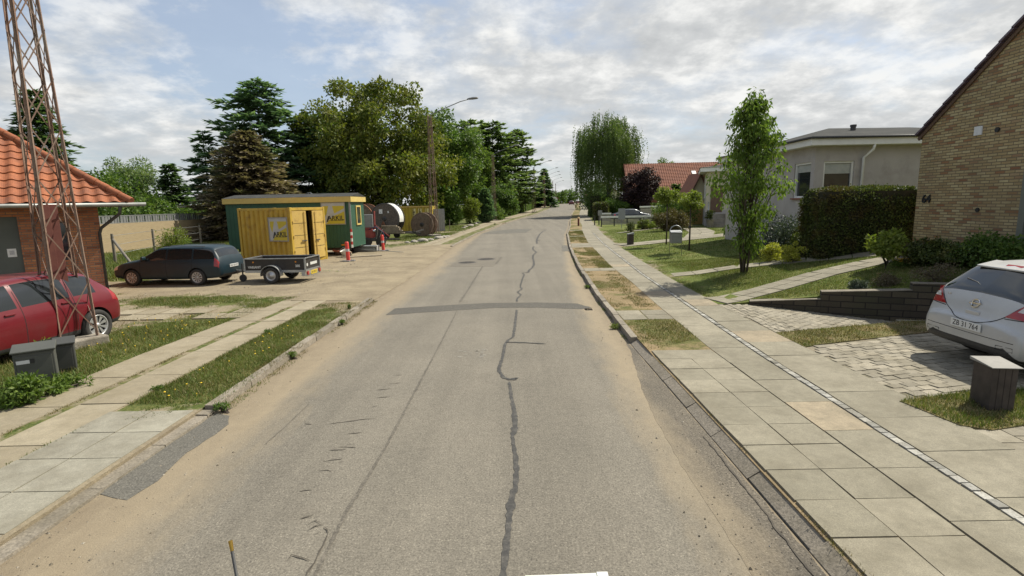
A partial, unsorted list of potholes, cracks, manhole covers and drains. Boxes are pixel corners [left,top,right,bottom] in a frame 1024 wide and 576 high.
crack [302,383,393,491]
crack [289,514,329,575]
